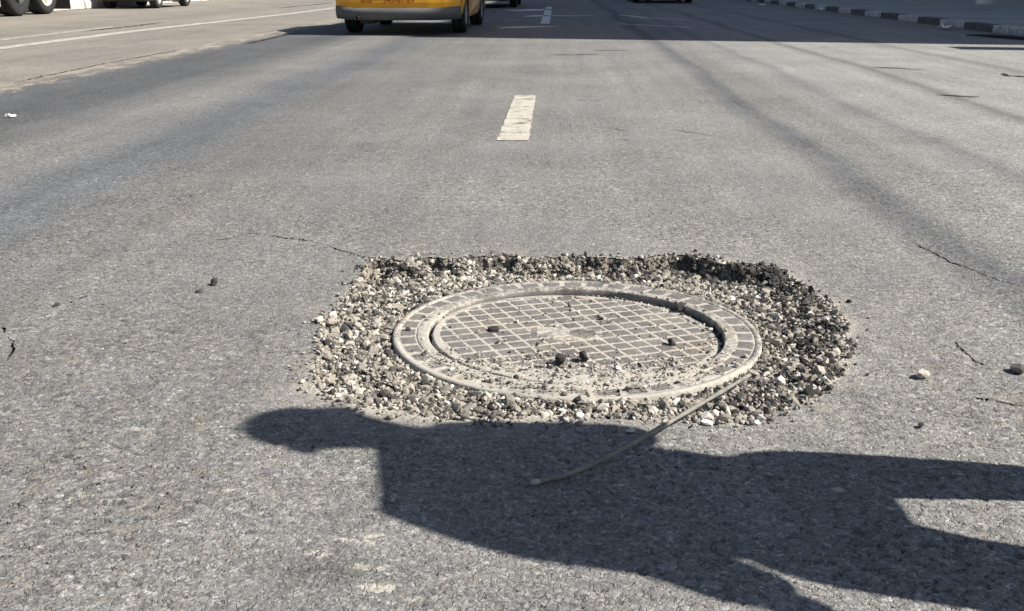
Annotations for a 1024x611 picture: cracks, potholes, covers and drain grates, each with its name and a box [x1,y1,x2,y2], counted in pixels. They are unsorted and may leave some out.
crack [3,332,16,360]
manhole cover [392,280,762,402]
crack [920,247,1000,281]
pothole [315,254,854,424]
